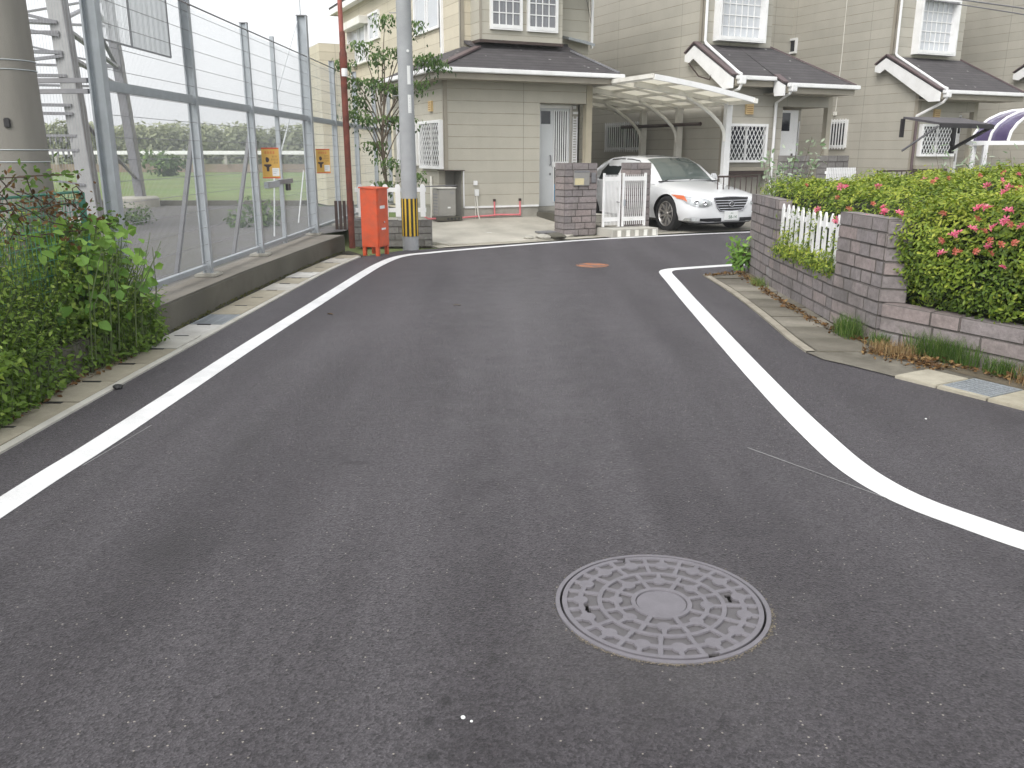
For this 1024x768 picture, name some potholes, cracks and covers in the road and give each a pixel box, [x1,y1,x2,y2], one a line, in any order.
drain grate [937,378,1023,401]
drain grate [191,314,240,325]
manhole cover [555,554,772,665]
